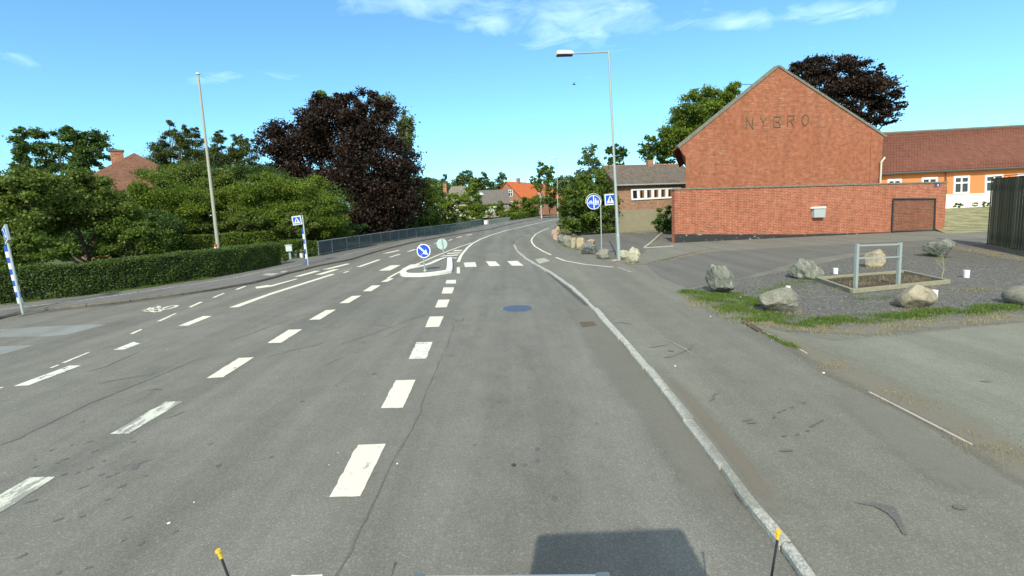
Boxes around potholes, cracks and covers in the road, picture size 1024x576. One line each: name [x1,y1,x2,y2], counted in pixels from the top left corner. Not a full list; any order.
crack [91,353,161,390]
